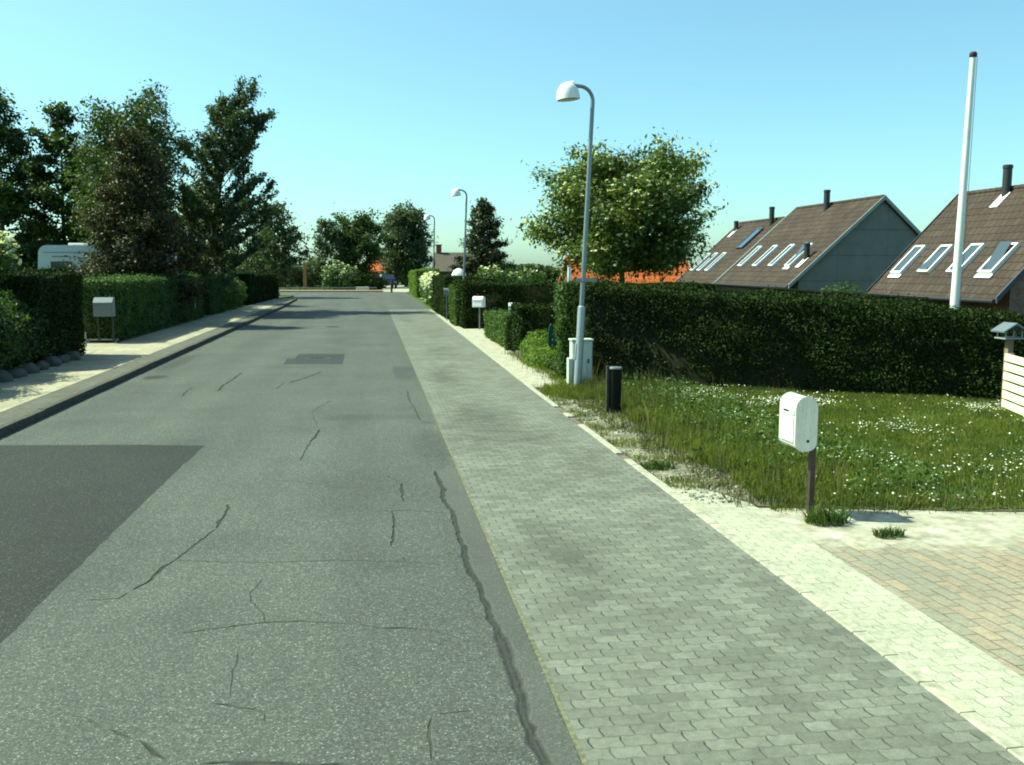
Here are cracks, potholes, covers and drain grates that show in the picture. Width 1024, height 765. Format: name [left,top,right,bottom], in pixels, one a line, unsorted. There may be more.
crack [402,391,433,423]
crack [300,401,331,461]
crack [92,470,558,765]
